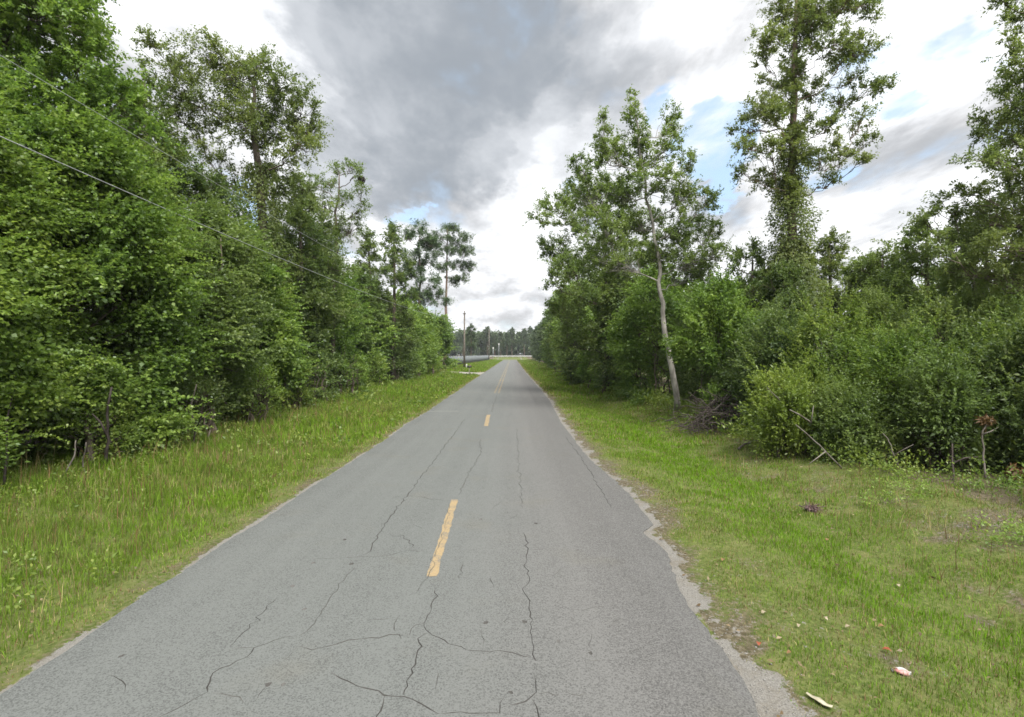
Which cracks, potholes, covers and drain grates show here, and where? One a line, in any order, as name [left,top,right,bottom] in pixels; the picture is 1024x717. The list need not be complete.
crack [160,421,586,717]
